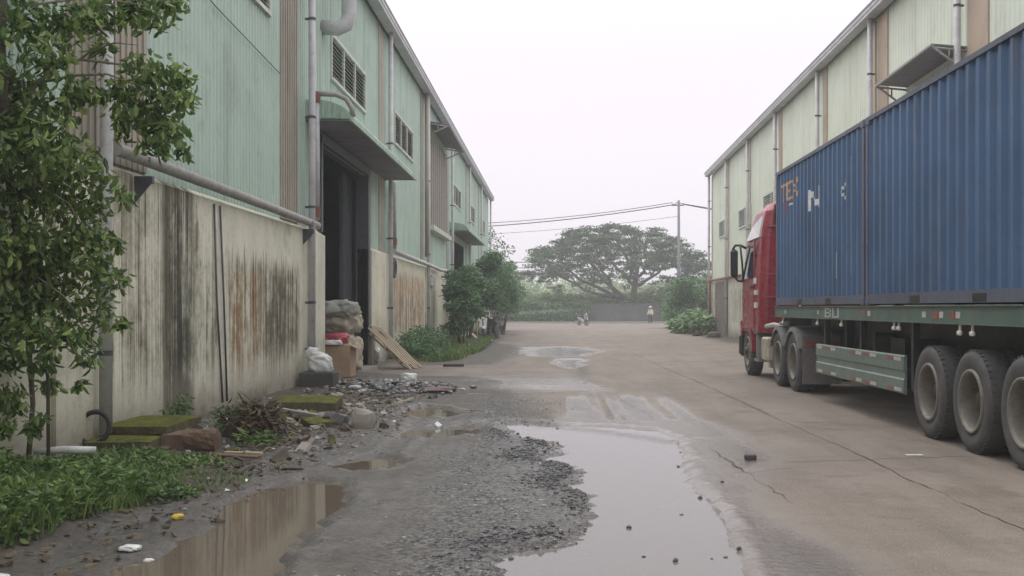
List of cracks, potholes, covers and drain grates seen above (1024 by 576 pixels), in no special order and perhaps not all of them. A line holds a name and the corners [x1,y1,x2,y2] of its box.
pothole [390,403,491,418]
pothole [512,346,604,357]
pothole [444,416,775,576]
pothole [316,450,420,472]
pothole [551,358,587,369]
pothole [69,472,369,576]
pothole [385,420,499,439]
